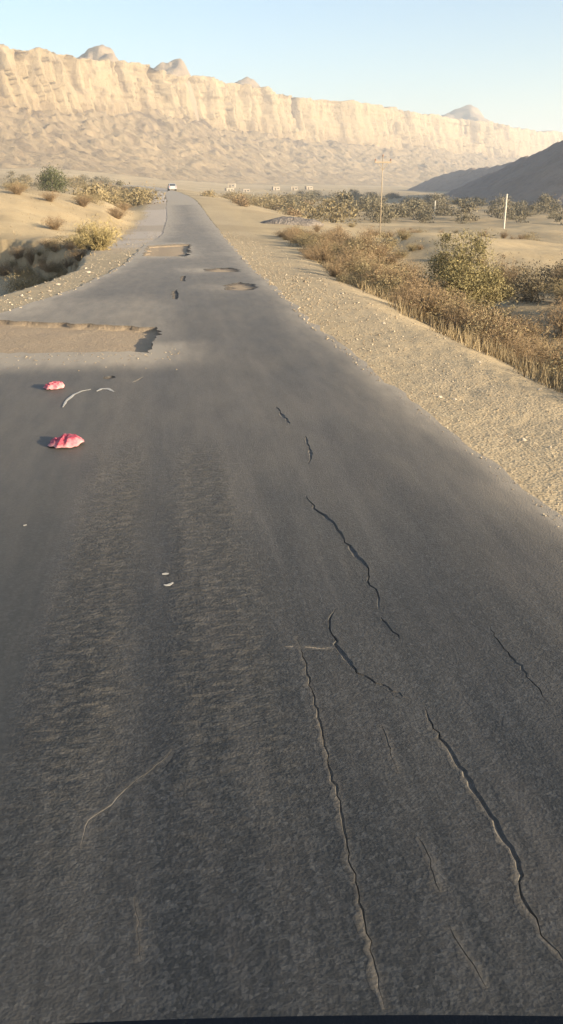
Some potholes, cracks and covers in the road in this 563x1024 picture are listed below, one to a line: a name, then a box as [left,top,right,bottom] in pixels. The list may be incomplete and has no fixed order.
pothole [0,320,162,353]
crack [76,748,175,848]
crack [285,495,563,989]
